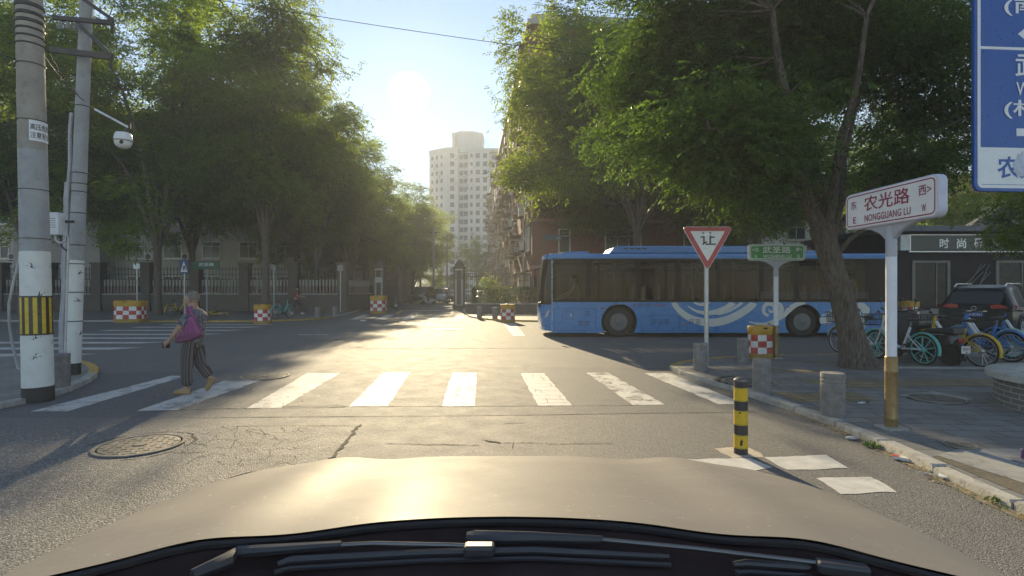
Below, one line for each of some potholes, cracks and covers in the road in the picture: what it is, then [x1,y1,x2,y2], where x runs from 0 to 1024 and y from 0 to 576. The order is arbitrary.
manhole cover [90,433,187,457]
manhole cover [239,372,290,380]
manhole cover [942,441,978,450]
manhole cover [900,391,972,404]
crack [482,439,612,449]
crack [327,424,362,459]
